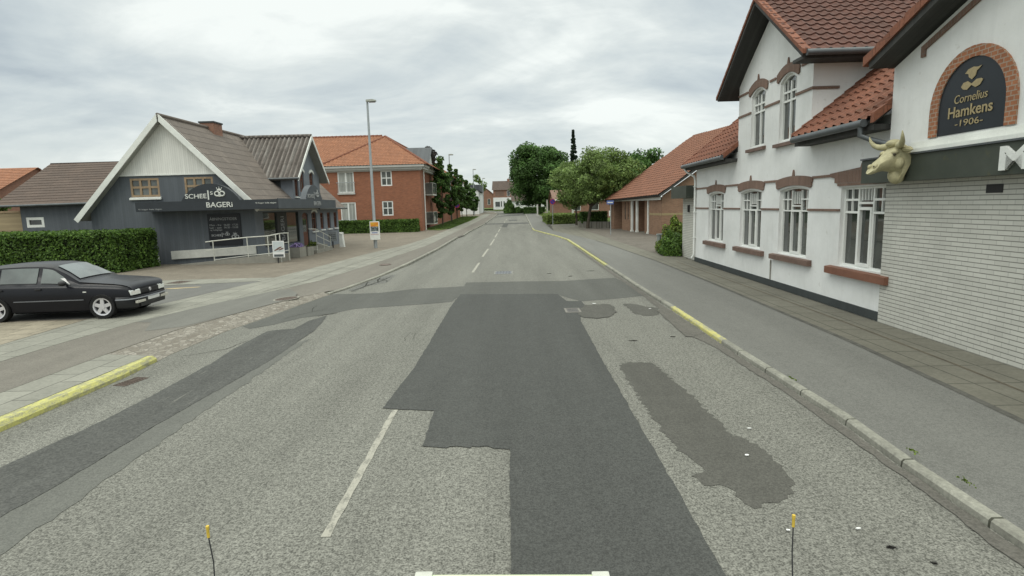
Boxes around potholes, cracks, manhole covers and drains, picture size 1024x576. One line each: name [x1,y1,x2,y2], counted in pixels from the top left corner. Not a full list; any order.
drain grate [113,377,149,386]
